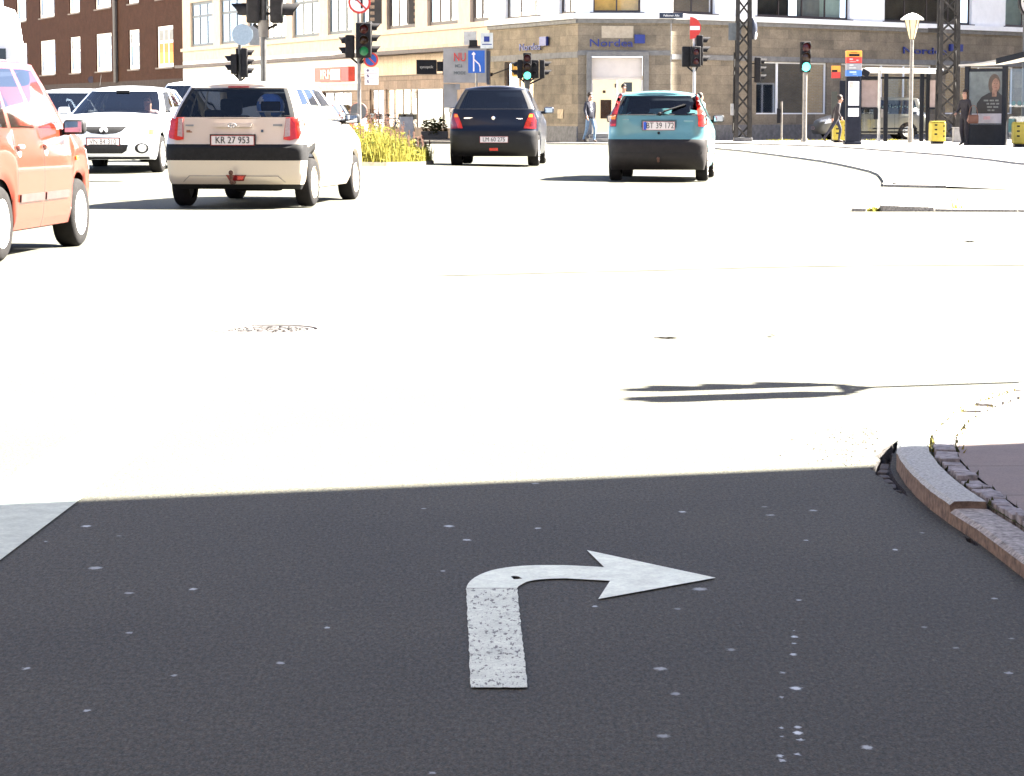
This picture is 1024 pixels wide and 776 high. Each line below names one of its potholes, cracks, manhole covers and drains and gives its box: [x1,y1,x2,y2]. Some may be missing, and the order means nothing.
manhole cover [211,324,324,334]
pothole [871,442,908,496]
